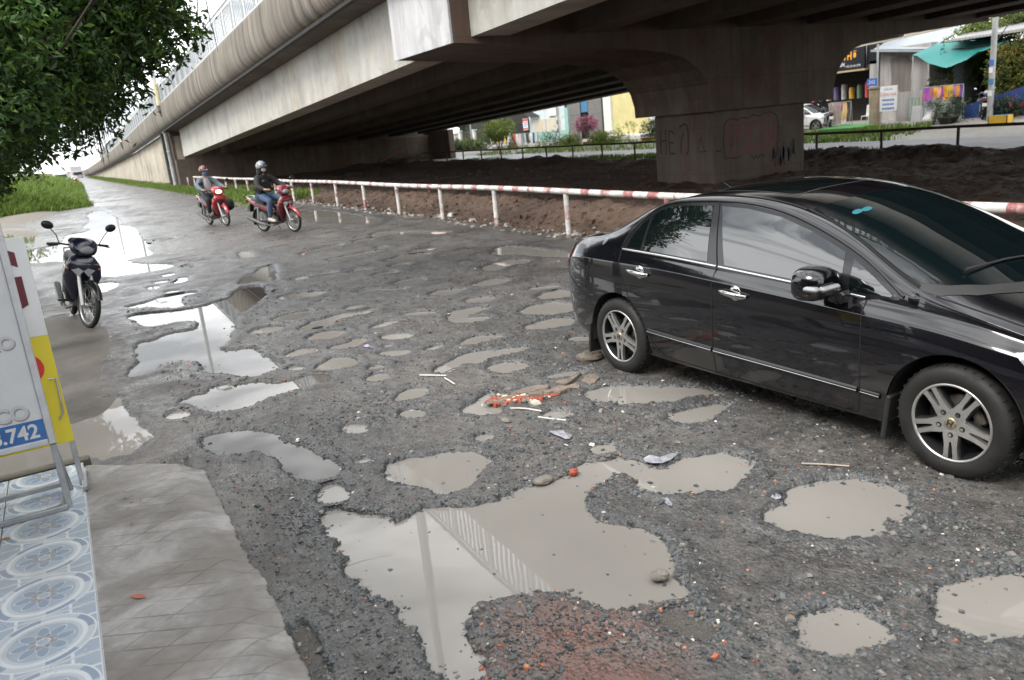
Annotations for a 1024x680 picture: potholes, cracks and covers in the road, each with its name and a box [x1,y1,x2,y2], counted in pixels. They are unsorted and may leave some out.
pothole [380,382,442,405]
pothole [743,468,935,550]
pothole [766,588,926,675]
pothole [183,422,356,486]
pothole [226,262,289,286]
pothole [163,369,345,416]
pothole [509,299,574,317]
pothole [304,442,772,680]
pothole [435,303,502,326]
pothole [109,282,299,382]
pothole [652,396,749,429]
pothole [571,378,743,409]
